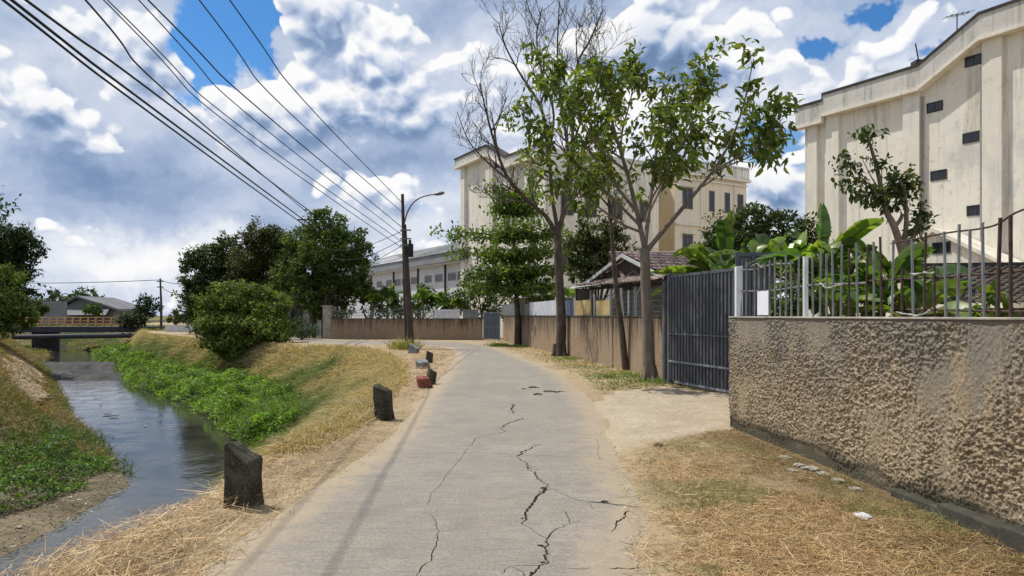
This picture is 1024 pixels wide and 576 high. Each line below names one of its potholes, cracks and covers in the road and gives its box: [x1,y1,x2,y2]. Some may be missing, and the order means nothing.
crack [416,404,670,576]
